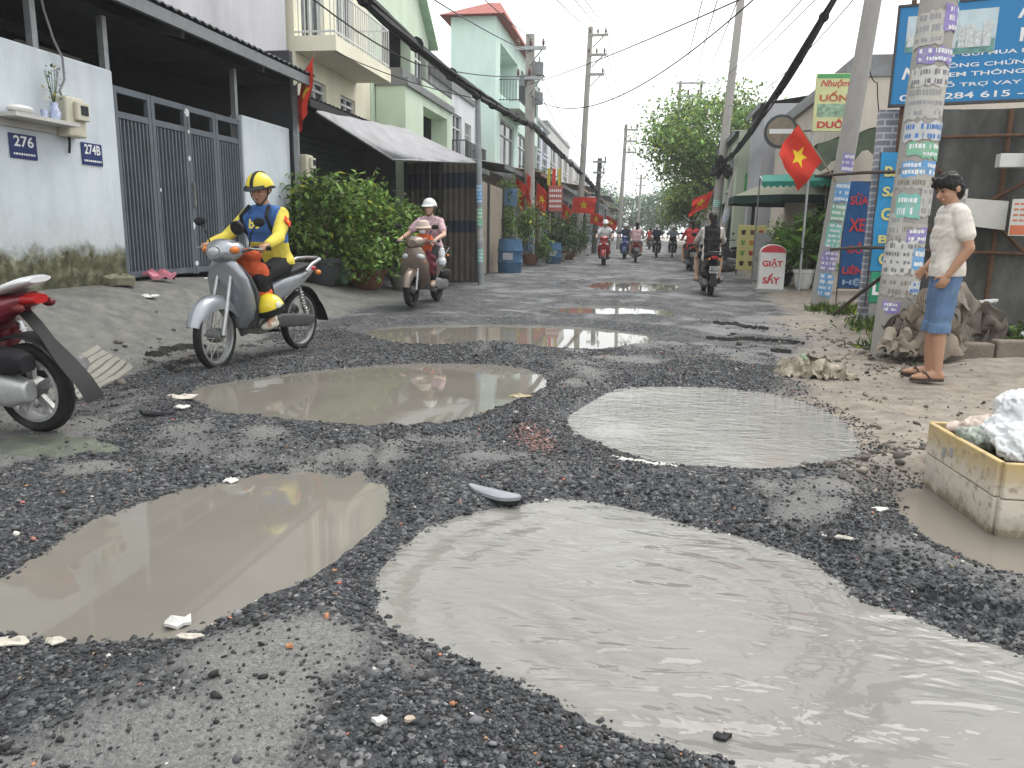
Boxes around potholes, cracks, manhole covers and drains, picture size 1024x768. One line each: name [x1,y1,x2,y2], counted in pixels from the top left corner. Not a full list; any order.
pothole [579,279,685,291]
pothole [551,304,680,316]
pothole [179,359,555,426]
crack [706,321,805,345]
pothole [0,462,418,653]
pothole [353,487,1024,768]
pothole [360,323,660,349]
pothole [550,381,878,469]
